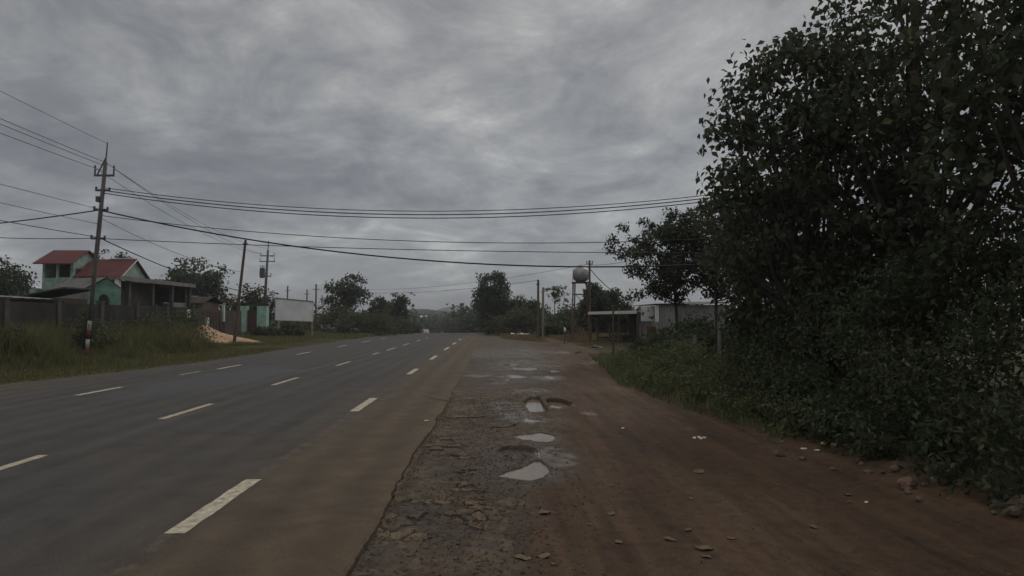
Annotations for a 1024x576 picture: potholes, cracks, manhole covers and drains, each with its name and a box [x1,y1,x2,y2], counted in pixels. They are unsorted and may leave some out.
pothole [510,431,557,442]
pothole [494,459,553,480]
pothole [492,445,538,460]
crack [348,395,520,576]
pothole [544,397,574,408]
pothole [522,396,550,412]
